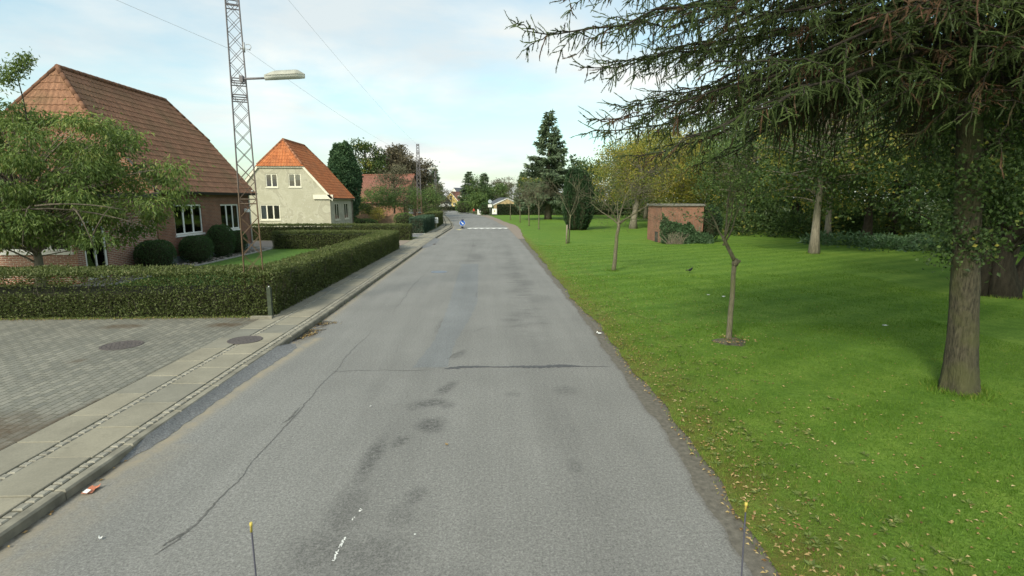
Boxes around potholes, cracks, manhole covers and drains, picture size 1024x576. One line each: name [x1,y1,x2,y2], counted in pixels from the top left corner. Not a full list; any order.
manhole cover [99,340,144,350]
manhole cover [227,336,263,344]
crack [158,331,408,553]
